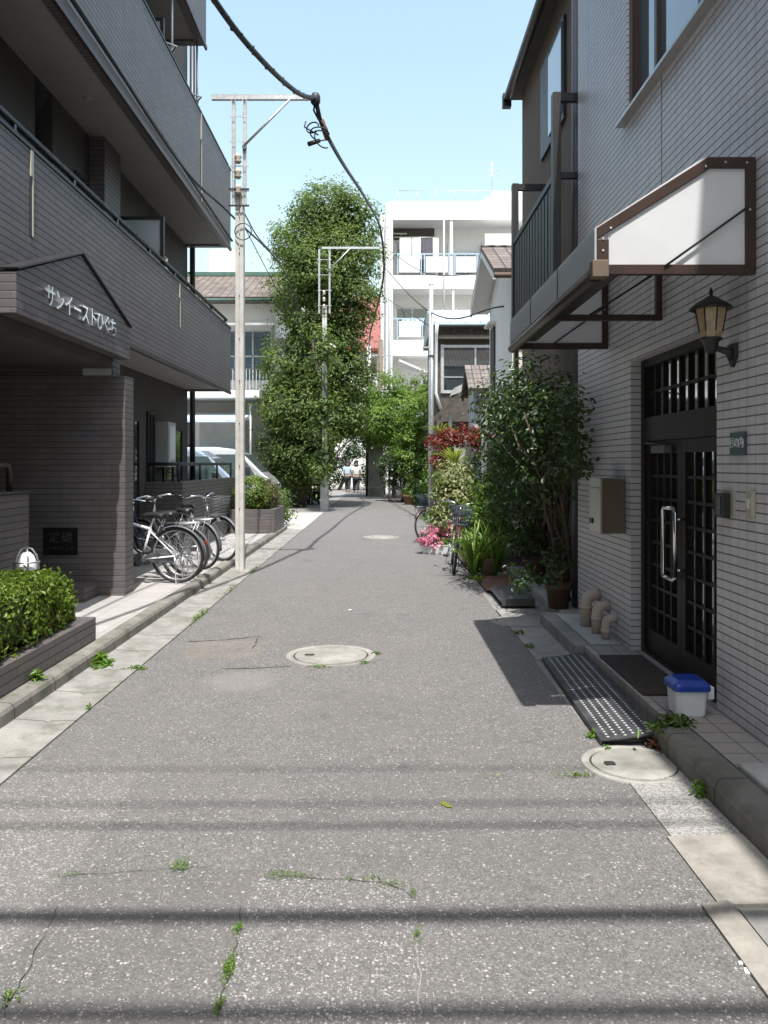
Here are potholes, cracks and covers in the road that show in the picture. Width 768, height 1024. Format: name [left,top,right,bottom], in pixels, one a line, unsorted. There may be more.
manhole cover [286,645,375,667]
crack [217,908,241,1021]
manhole cover [581,745,685,784]
crack [287,875,422,1019]
crack [4,905,58,1010]
